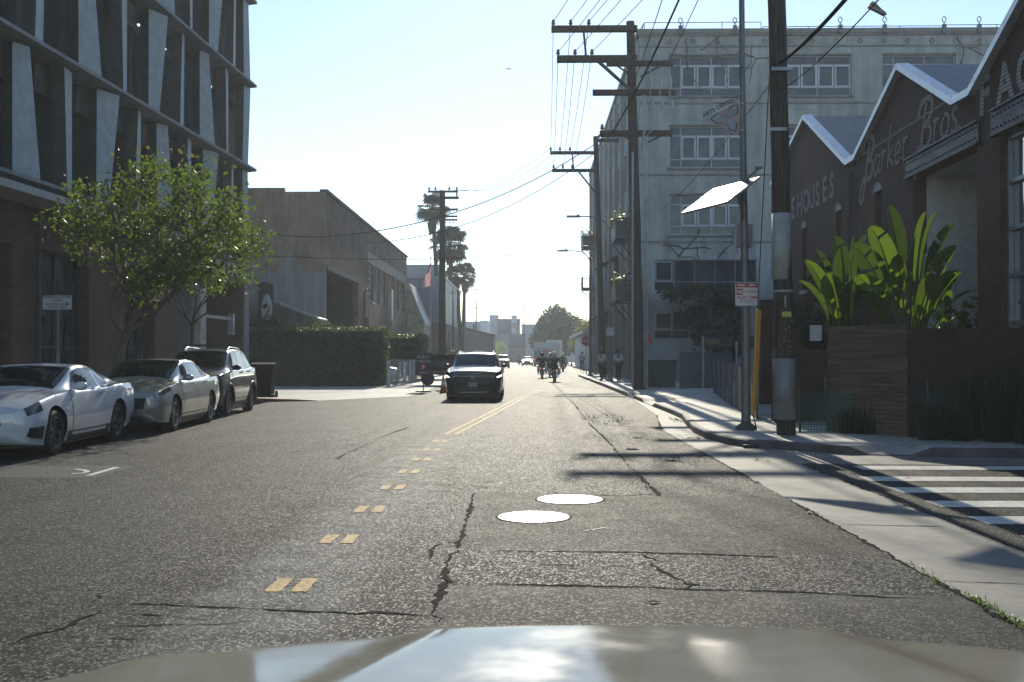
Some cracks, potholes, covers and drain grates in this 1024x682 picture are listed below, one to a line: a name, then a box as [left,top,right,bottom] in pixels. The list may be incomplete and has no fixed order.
crack [6,484,507,649]
crack [580,414,1021,628]
manhole cover [496,511,572,523]
manhole cover [535,495,605,504]
crack [516,554,702,588]
